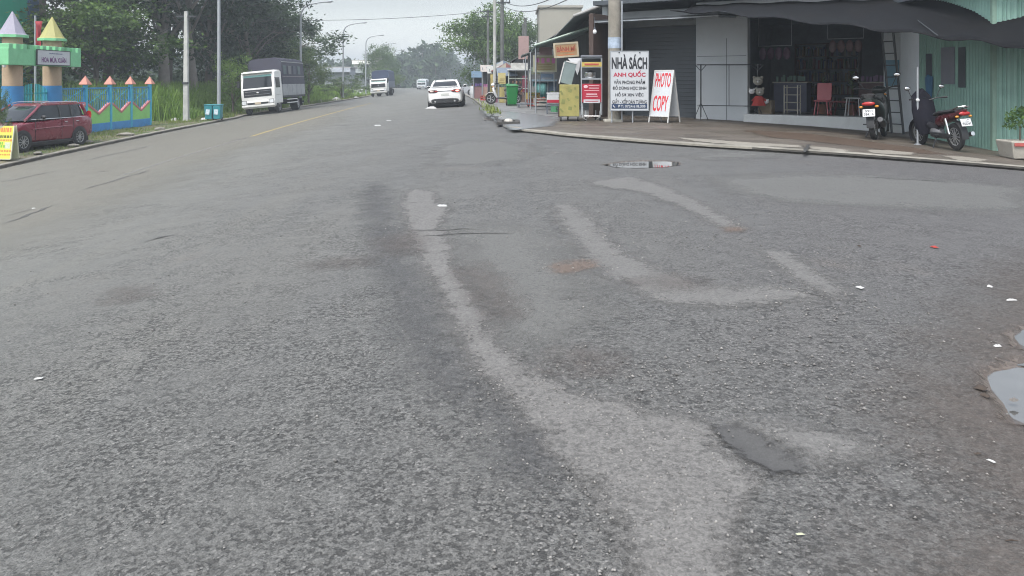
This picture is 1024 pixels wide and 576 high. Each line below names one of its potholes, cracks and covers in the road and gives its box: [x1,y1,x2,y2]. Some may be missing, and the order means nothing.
pothole [713,422,803,474]
pothole [973,363,1014,421]
pothole [1002,325,1024,349]
